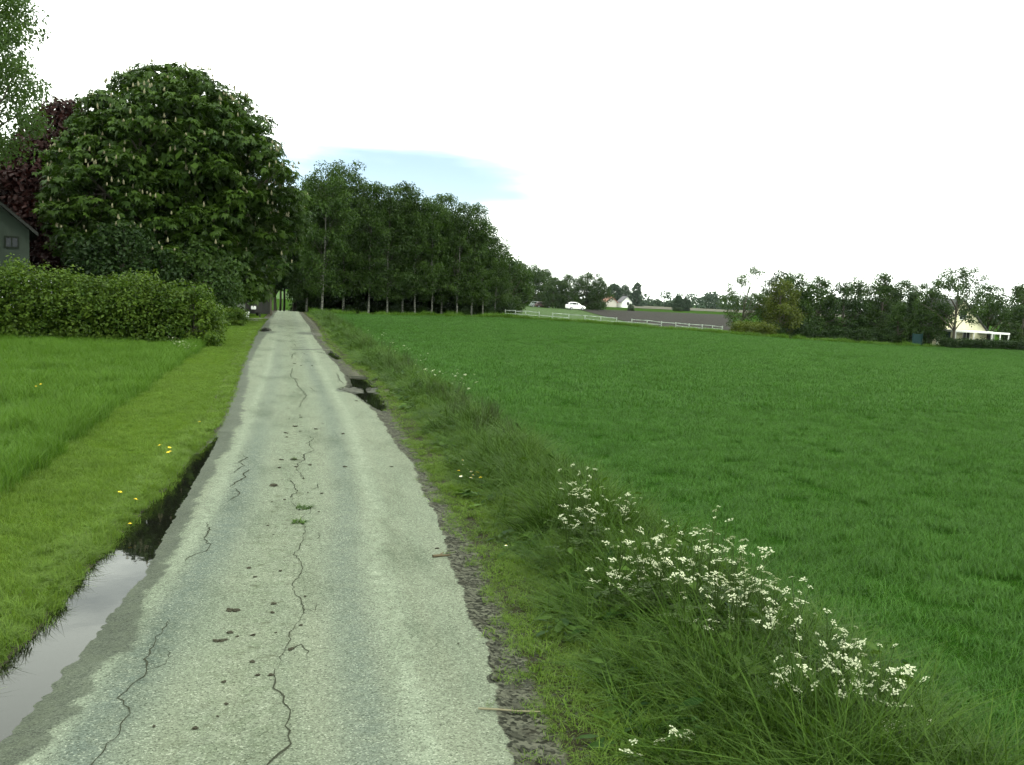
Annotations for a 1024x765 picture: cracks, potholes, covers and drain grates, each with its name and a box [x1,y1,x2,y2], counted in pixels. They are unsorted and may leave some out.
crack [276,437,318,498]
crack [266,508,320,765]
pothole [337,375,389,412]
crack [91,620,170,765]
crack [230,443,250,499]
